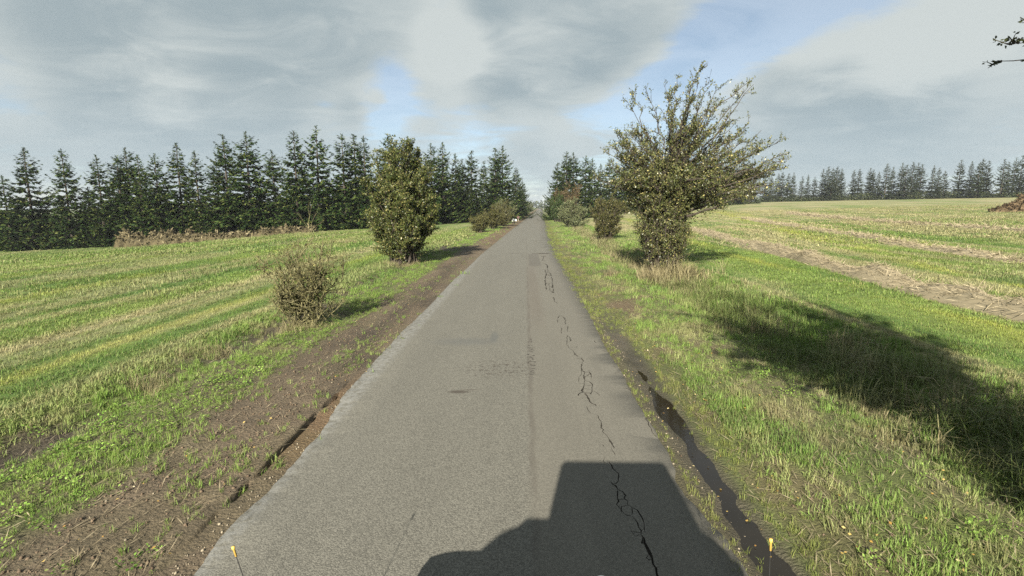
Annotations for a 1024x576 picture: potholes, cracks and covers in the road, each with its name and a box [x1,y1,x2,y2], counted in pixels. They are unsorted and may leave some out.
crack [532,253,659,576]
